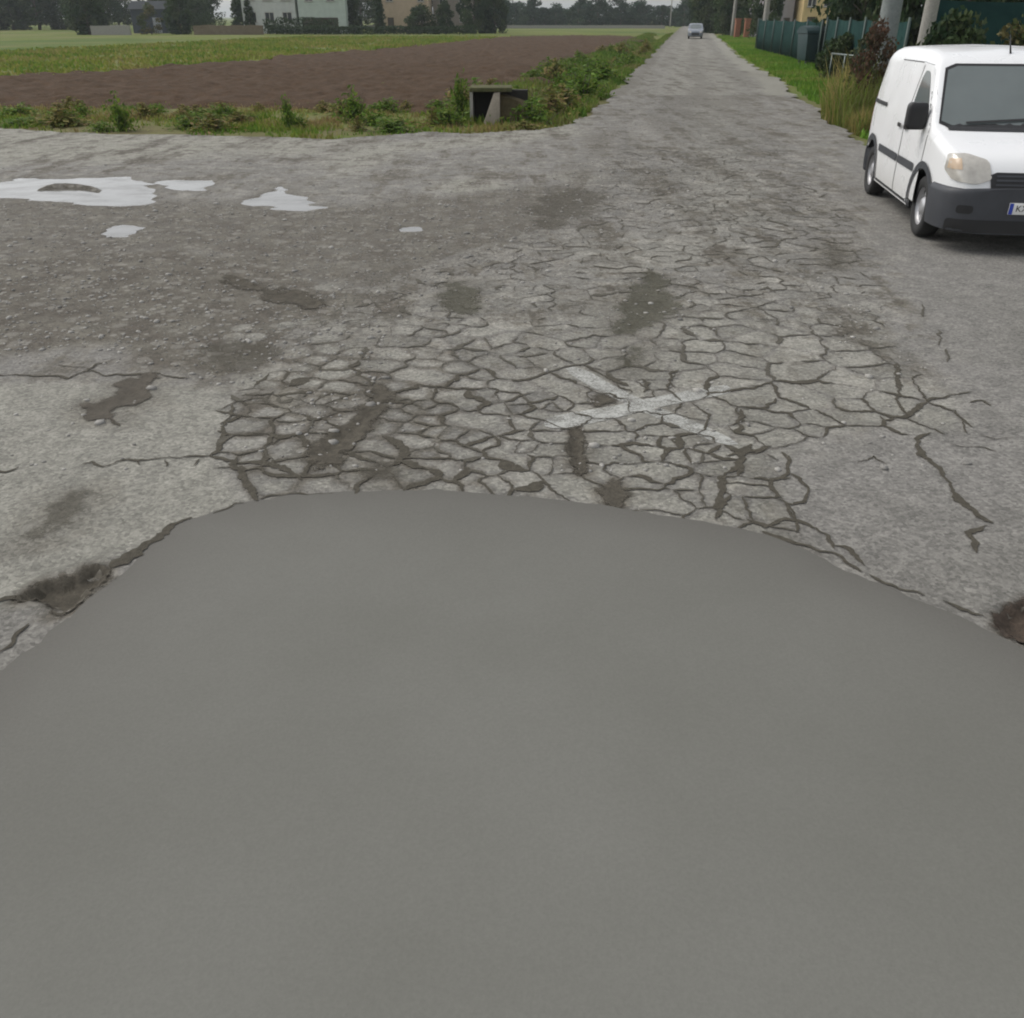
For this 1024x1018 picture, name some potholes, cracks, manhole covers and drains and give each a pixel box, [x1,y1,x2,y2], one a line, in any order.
pothole [14,563,116,617]
crack [81,146,1014,595]
crack [0,361,188,379]
pothole [76,371,161,421]
crack [0,588,46,602]
pothole [992,597,1024,643]
